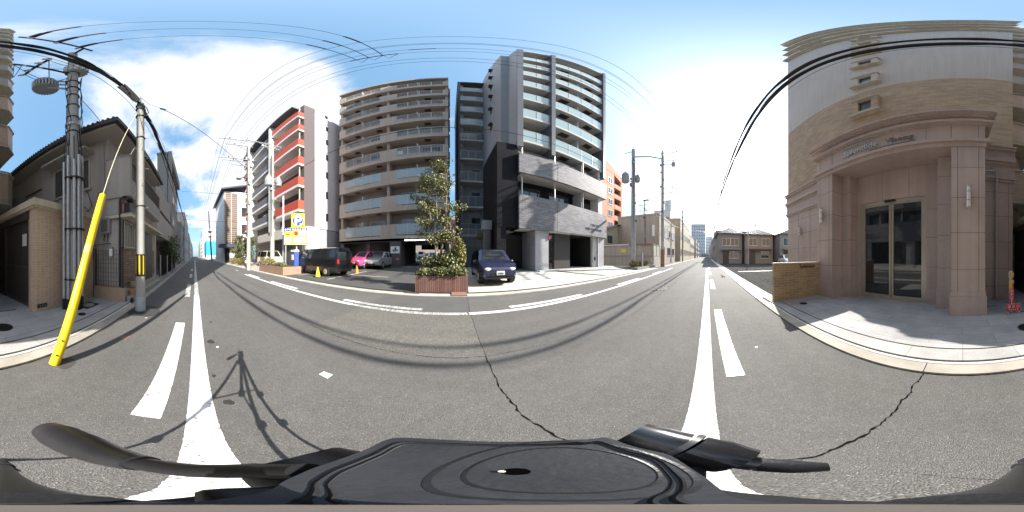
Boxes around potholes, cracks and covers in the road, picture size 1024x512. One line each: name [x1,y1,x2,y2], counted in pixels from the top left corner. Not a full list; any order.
crack [467,297,566,440]
crack [782,374,998,480]
